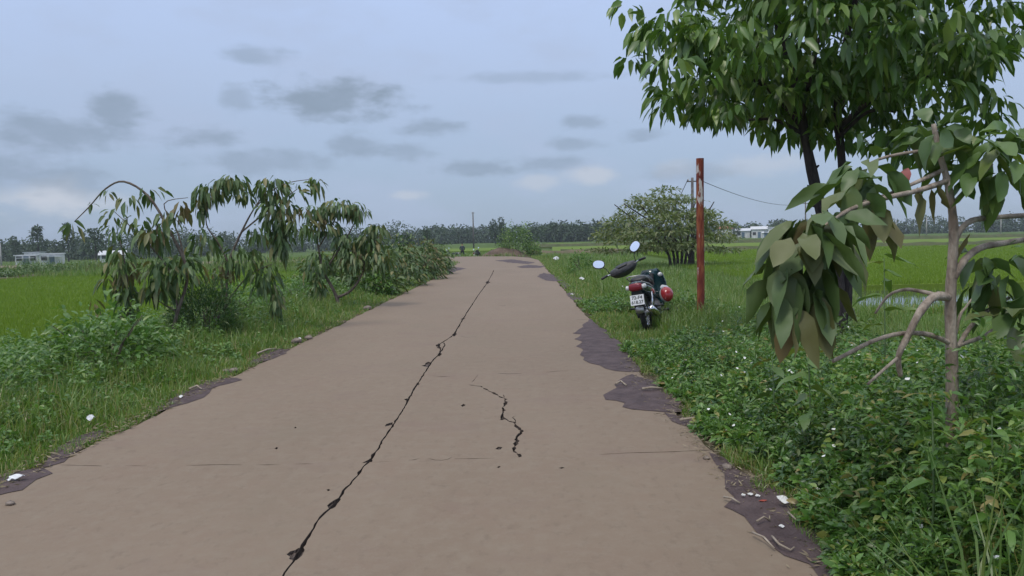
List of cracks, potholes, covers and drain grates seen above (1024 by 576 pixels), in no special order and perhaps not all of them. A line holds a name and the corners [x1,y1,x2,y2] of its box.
crack [473,373,523,457]
crack [282,270,494,576]
